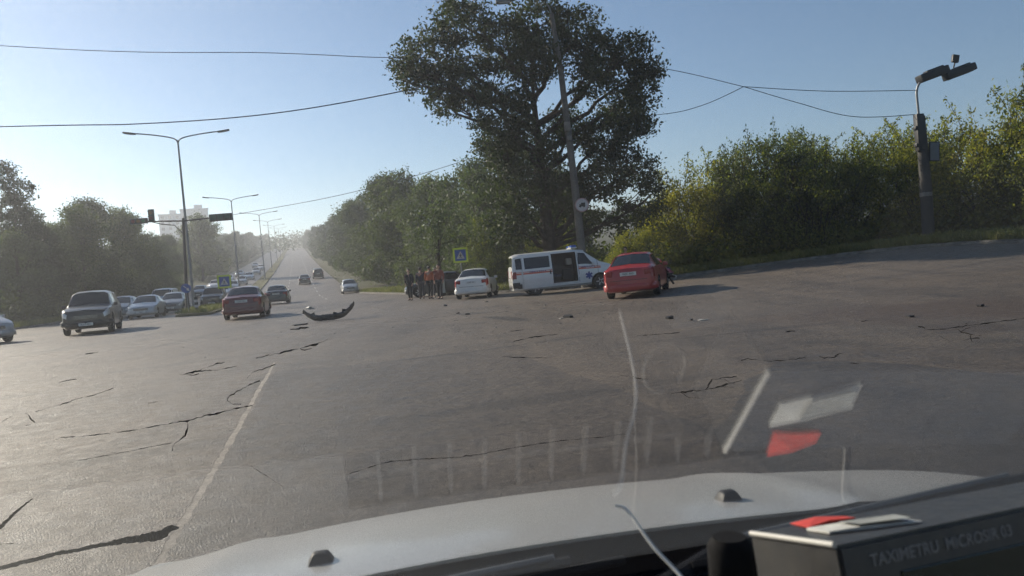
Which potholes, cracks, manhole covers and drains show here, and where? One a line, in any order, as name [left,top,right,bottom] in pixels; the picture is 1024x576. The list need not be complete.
crack [61,339,328,462]
crack [918,319,1017,341]
crack [671,357,805,399]
crack [0,499,179,570]
crack [2,379,113,426]
crack [347,434,621,475]
crack [505,330,557,358]
